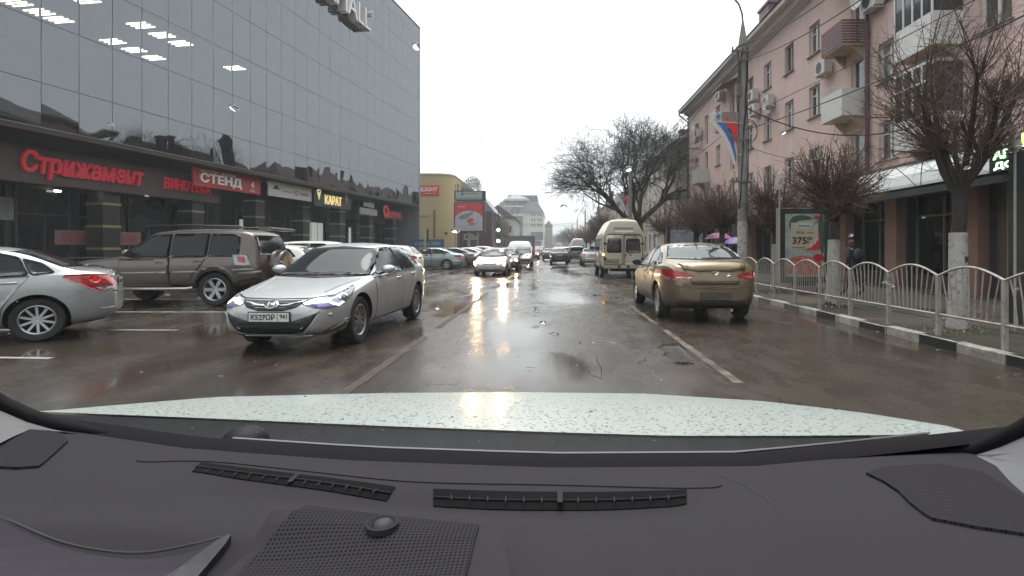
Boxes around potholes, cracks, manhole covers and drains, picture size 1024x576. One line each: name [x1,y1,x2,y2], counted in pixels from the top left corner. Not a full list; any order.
crack [556,341,654,379]
pothole [657,343,697,361]
